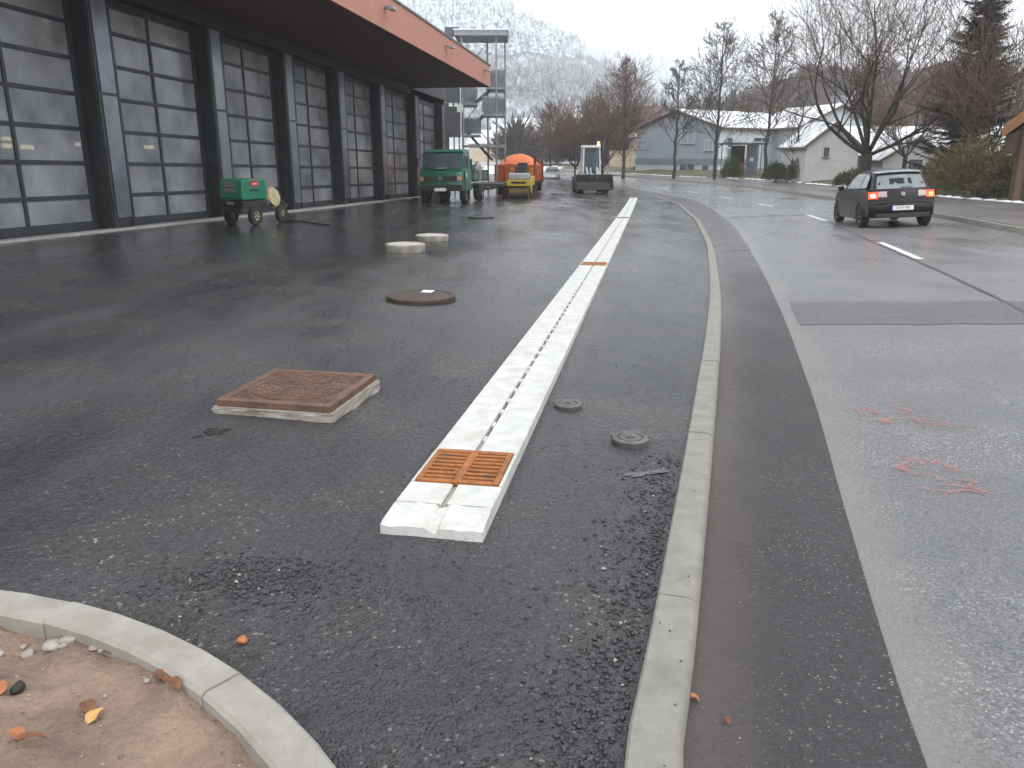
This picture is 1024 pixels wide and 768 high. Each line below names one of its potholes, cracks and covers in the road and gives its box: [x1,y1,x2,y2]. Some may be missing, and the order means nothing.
manhole cover [415,233,448,241]
manhole cover [610,431,650,449]
manhole cover [385,289,457,306]
manhole cover [211,369,380,423]
manhole cover [553,399,583,411]
manhole cover [385,241,425,253]
